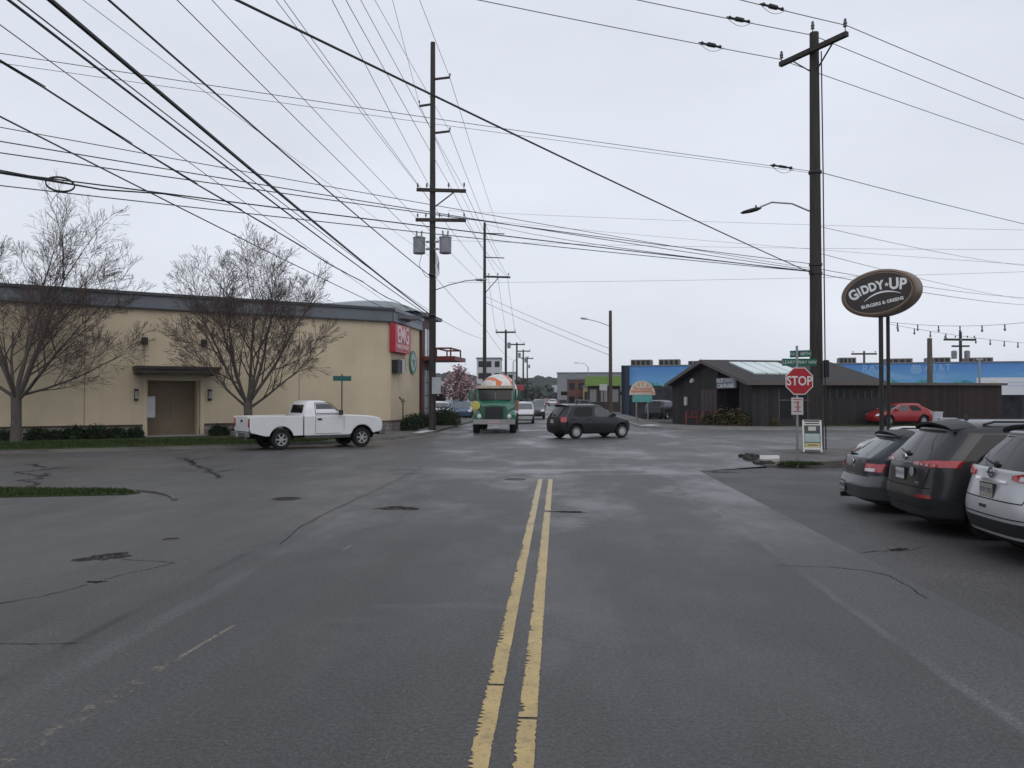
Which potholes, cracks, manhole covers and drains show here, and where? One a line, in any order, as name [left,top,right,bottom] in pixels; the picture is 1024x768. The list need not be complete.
crack [778,545,931,598]
crack [16,464,66,488]
crack [178,457,227,478]
crack [3,559,173,603]
crack [280,467,423,544]
pothole [71,552,132,562]
